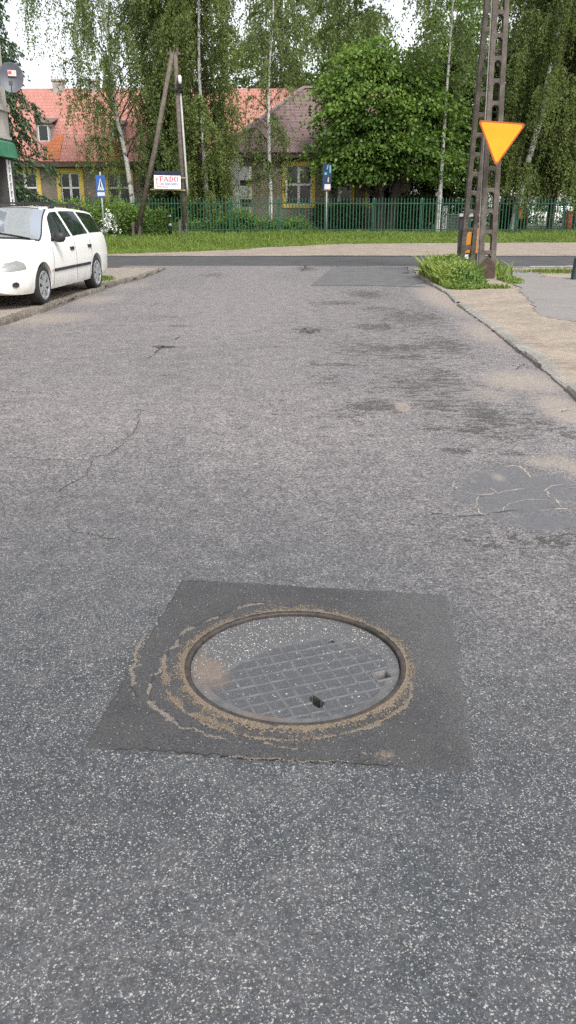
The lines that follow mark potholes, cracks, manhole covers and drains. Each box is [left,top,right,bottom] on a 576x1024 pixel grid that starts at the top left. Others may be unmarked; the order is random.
manhole cover [184,611,406,726]
crack [18,411,141,508]
